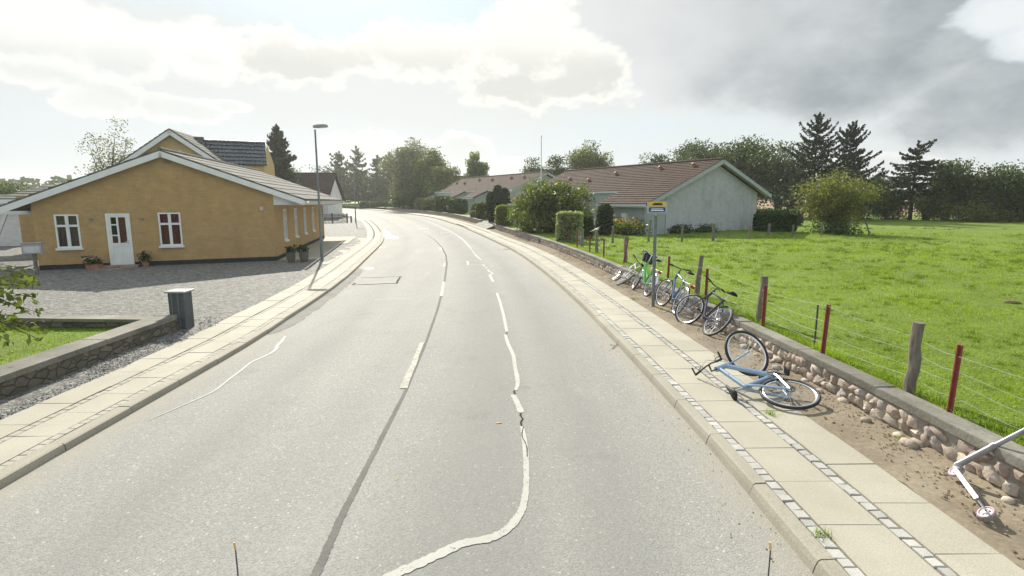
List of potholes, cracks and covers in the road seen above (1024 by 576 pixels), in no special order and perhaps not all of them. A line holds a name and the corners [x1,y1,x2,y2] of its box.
crack [148,336,286,421]
